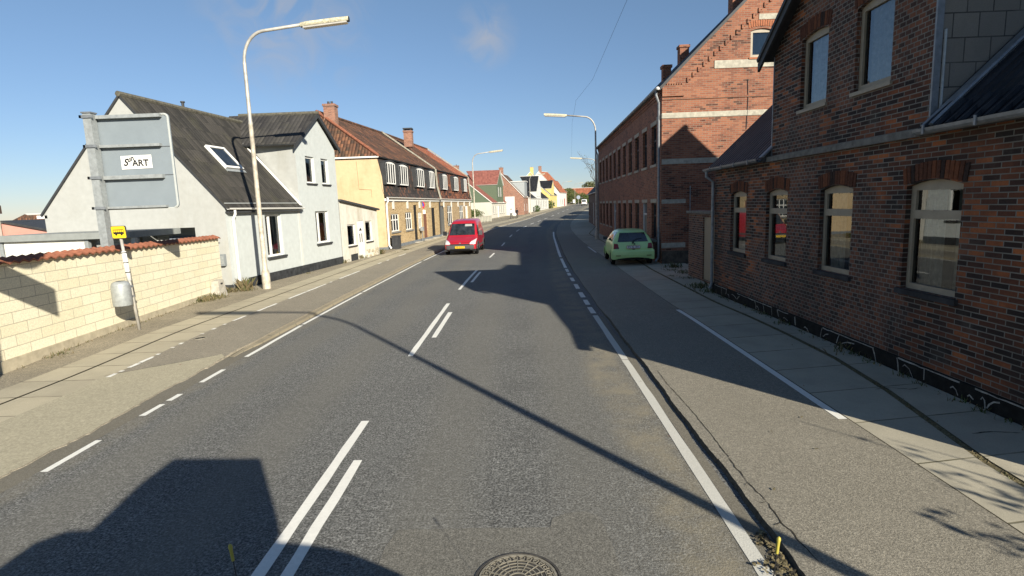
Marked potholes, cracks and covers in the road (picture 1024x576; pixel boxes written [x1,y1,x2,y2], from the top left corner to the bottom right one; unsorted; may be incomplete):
manhole cover [475,552,562,576]
crack [659,373,817,560]
